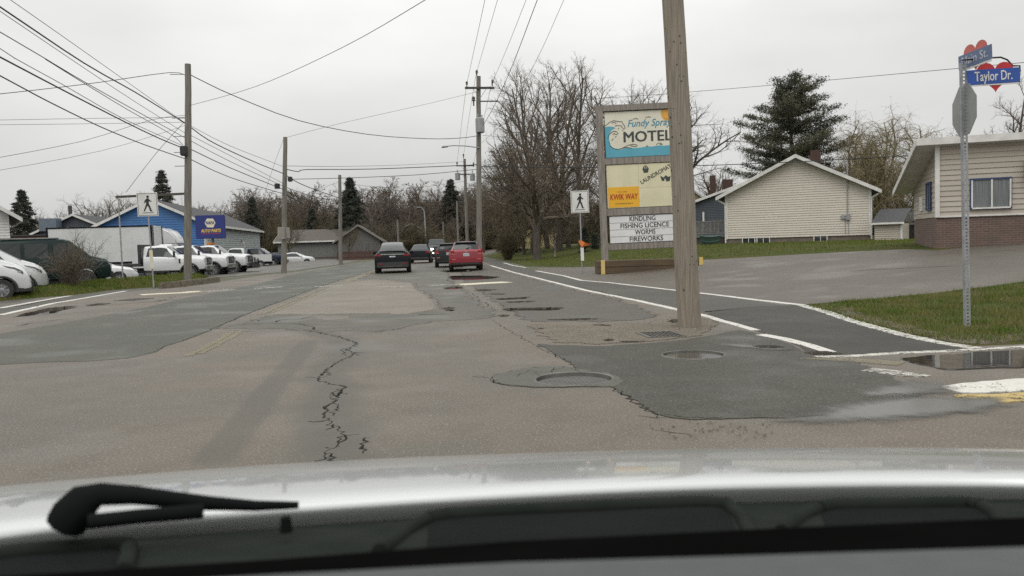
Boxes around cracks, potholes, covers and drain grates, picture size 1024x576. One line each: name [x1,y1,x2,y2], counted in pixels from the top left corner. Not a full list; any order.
pothole [16,306,75,317]
crack [226,317,369,462]
manhole cover [661,350,726,359]
manhole cover [534,371,614,386]
